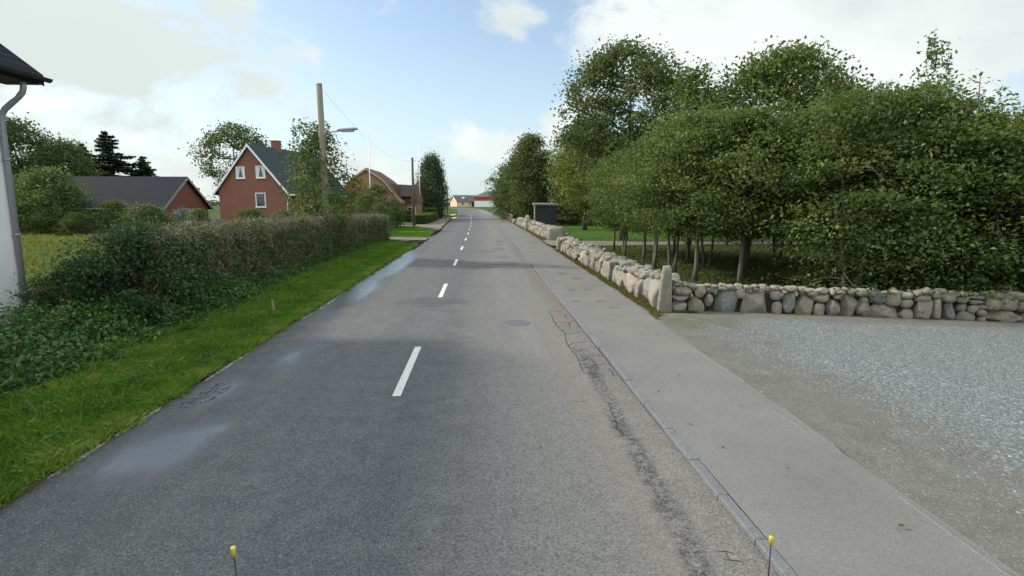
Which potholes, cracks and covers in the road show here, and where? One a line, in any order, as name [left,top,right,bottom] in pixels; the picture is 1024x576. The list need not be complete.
crack [604,401,637,441]
crack [549,311,614,376]
